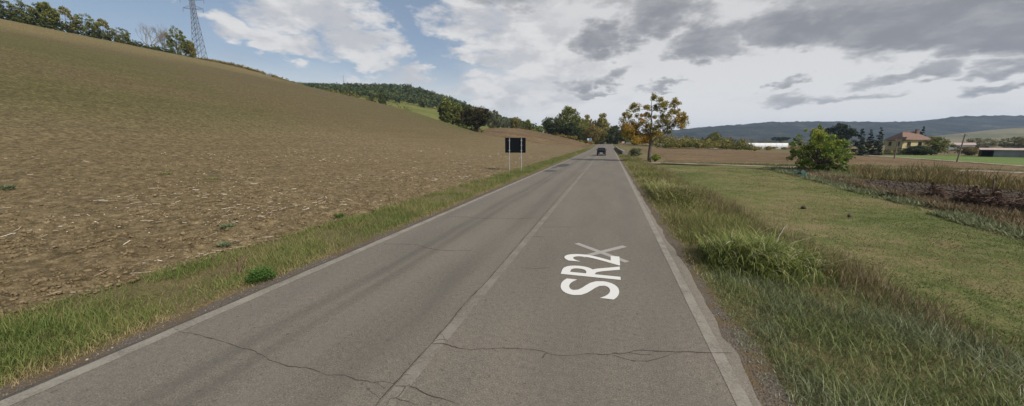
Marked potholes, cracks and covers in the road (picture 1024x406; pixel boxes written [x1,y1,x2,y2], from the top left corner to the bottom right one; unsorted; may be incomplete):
crack [174,328,457,405]
crack [433,343,726,361]
